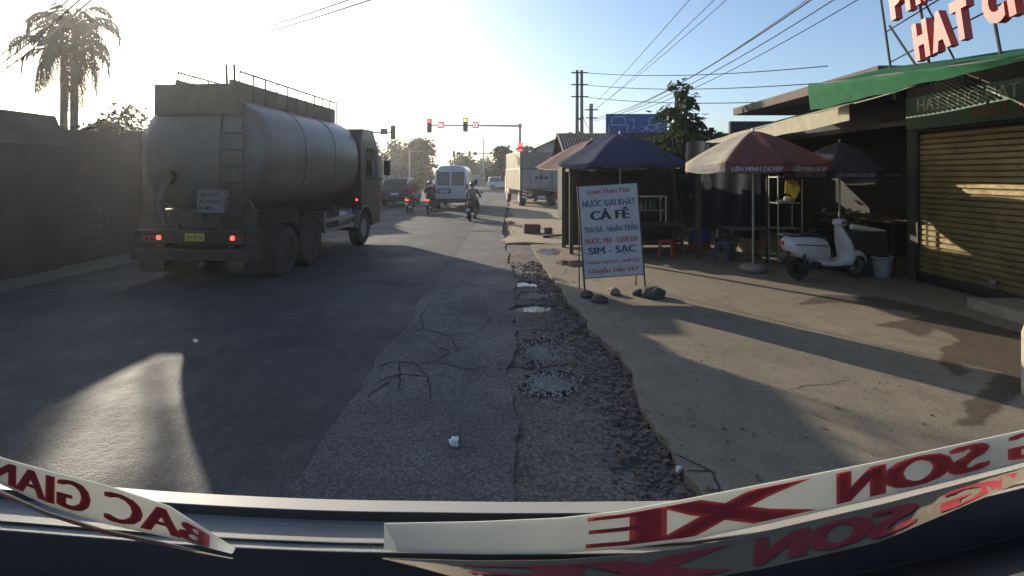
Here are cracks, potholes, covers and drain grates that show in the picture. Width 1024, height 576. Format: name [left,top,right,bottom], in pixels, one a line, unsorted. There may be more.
pothole [514,335,575,367]
pothole [510,365,588,401]
pothole [514,304,557,313]
crack [367,284,504,399]
